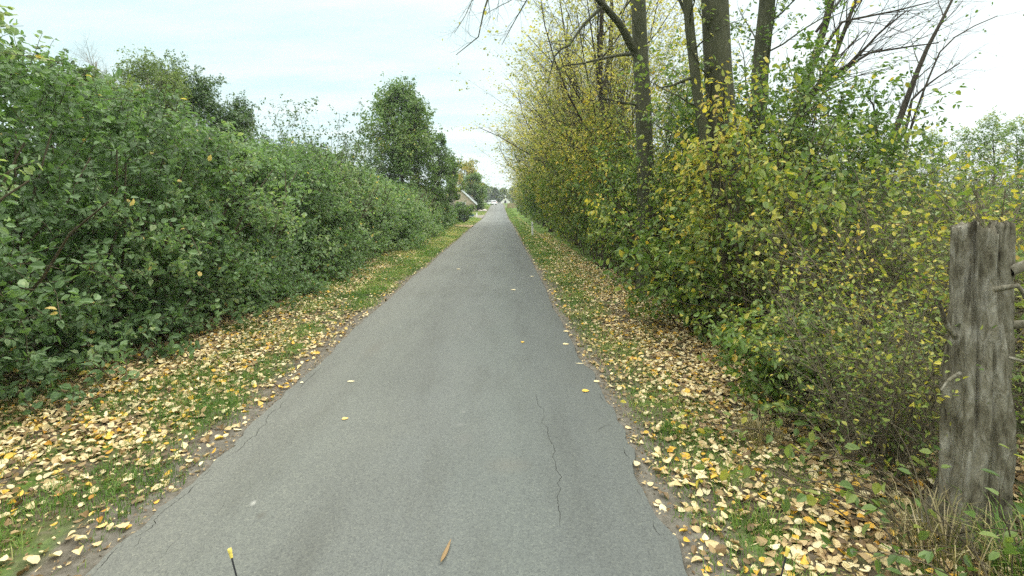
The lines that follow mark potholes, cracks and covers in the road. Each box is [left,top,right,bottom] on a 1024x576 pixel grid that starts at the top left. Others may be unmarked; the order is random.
crack [536,397,562,525]
